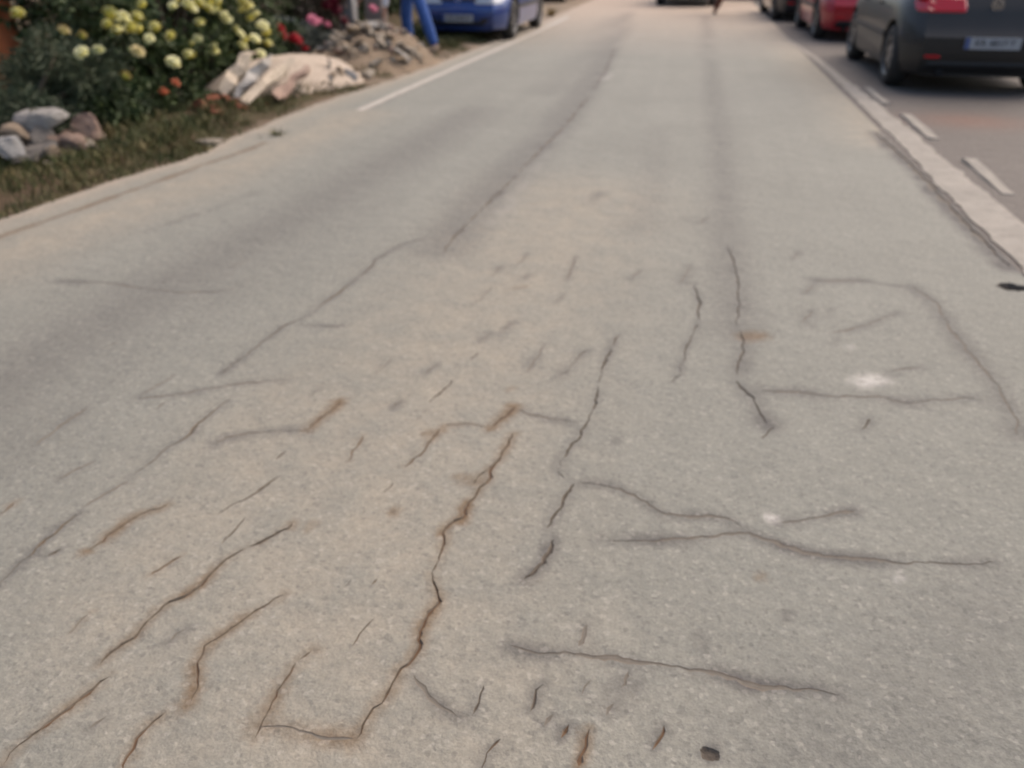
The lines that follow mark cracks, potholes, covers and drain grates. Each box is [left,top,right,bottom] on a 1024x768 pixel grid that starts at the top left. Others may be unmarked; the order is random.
crack [0,238,995,768]
